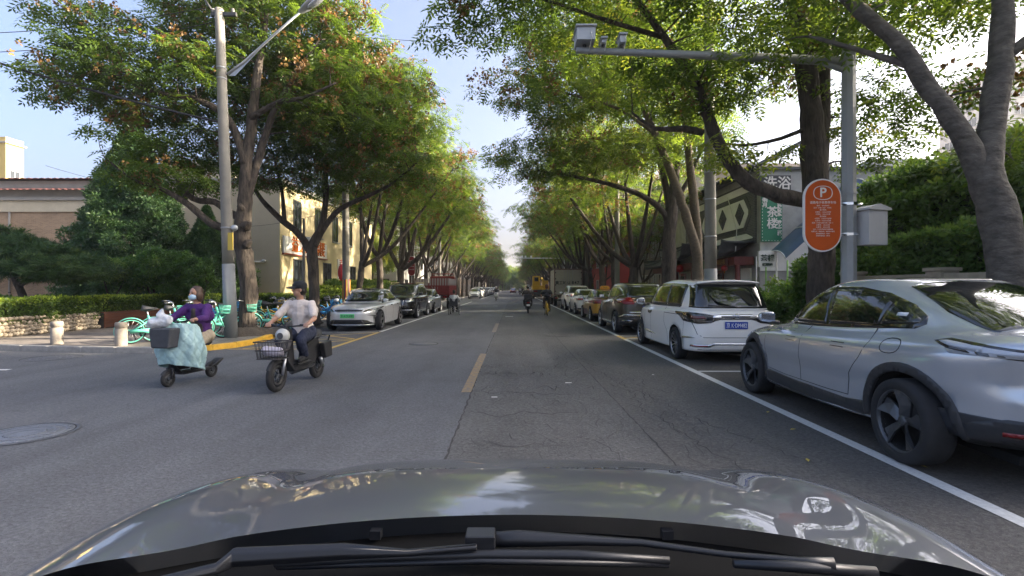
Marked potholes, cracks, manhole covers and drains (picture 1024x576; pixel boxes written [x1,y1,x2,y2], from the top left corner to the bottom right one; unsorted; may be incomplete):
manhole cover [0,422,81,446]
crack [456,334,814,469]
